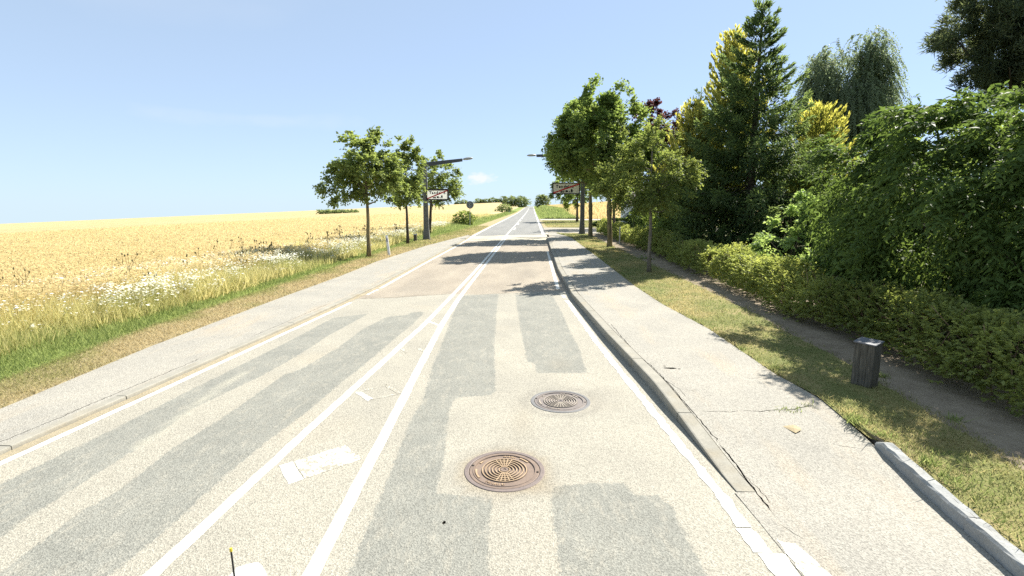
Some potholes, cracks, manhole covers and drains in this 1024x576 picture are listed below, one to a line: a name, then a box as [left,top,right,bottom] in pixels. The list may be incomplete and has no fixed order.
manhole cover [464,451,545,492]
manhole cover [531,390,590,413]
